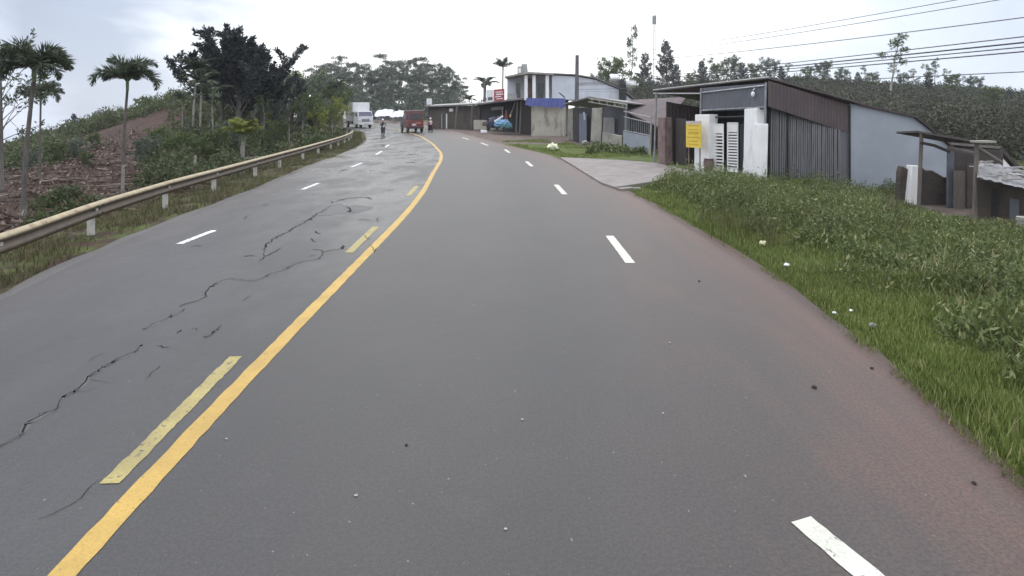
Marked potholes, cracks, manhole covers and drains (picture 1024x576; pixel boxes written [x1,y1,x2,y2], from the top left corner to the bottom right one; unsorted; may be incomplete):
crack [0,197,380,447]
